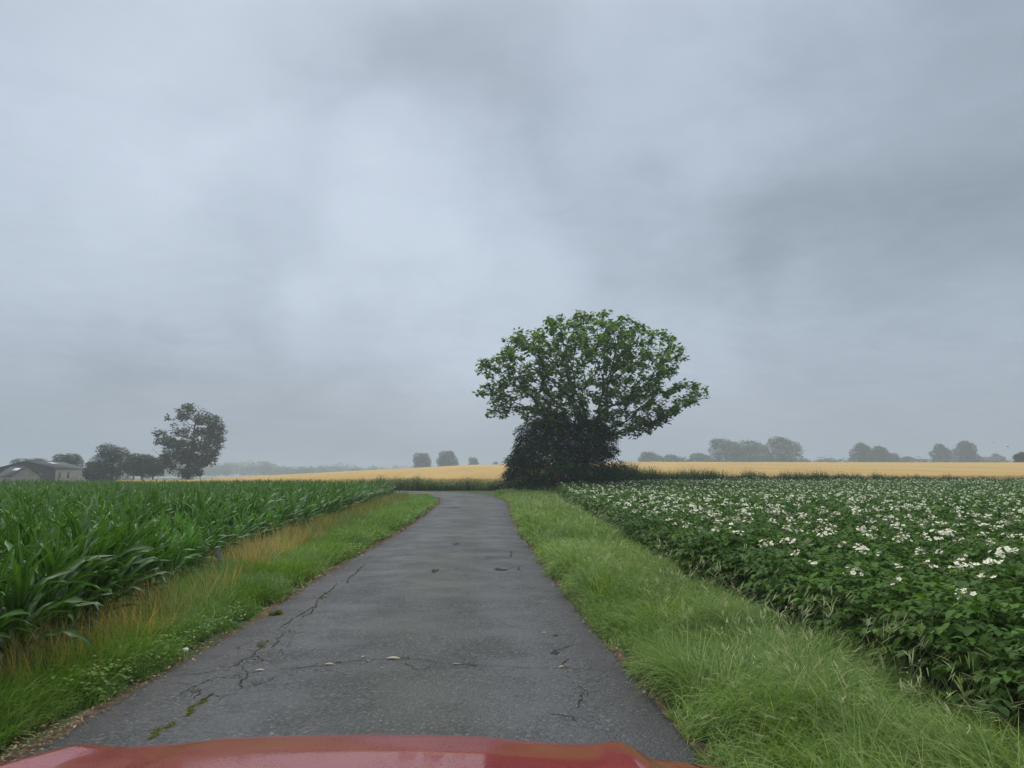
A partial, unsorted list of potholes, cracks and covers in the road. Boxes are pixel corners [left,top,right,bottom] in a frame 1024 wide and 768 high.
crack [167,556,627,721]
